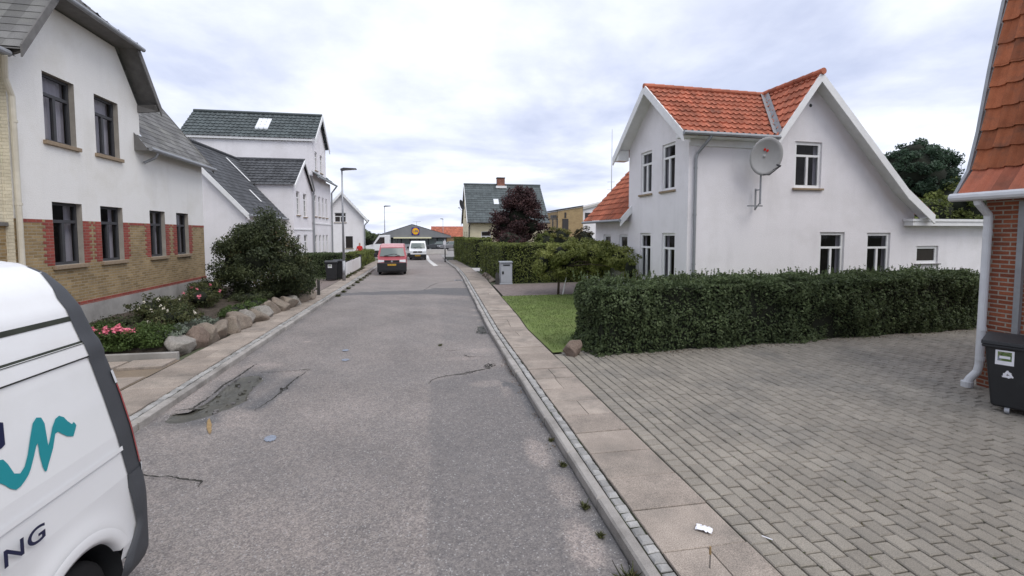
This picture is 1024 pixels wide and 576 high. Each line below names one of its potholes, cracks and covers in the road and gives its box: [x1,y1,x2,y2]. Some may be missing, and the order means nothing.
pothole [158,374,267,426]
crack [143,473,205,487]
crack [429,350,496,383]
